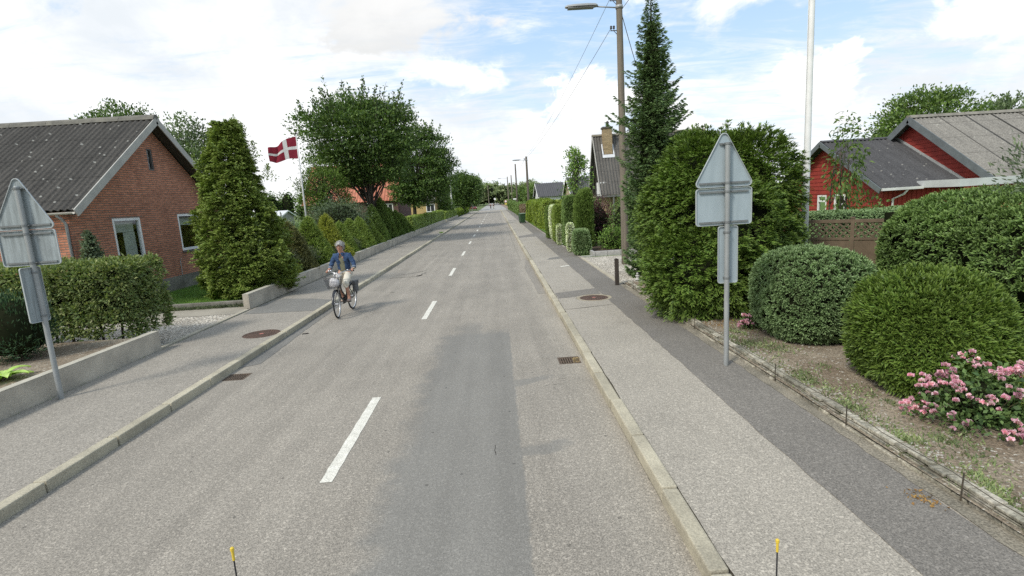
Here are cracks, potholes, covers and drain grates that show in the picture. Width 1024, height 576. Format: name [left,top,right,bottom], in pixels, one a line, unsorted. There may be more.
manhole cover [242,329,281,339]
drain grate [557,356,581,364]
drain grate [221,373,252,381]
